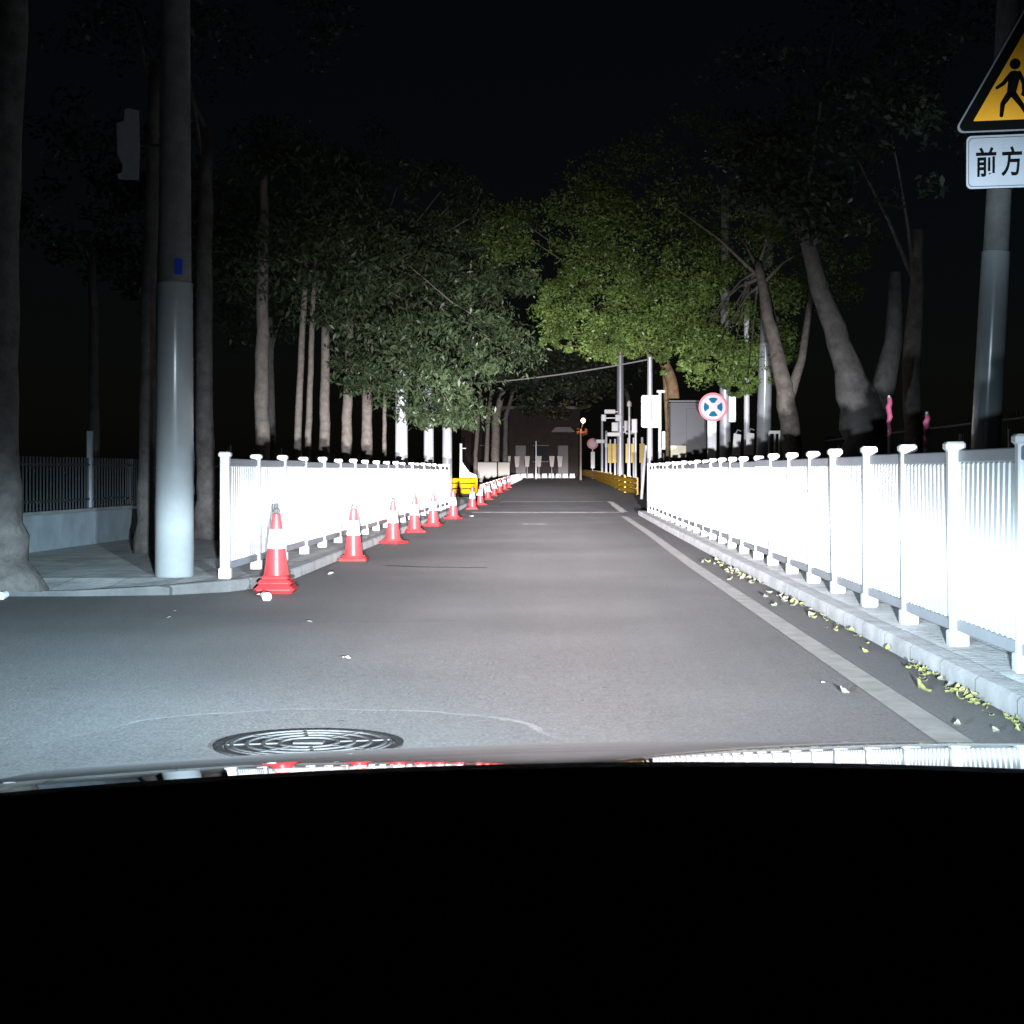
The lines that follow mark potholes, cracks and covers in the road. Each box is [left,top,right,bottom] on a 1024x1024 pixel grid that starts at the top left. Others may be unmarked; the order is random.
manhole cover [213,728,403,756]
